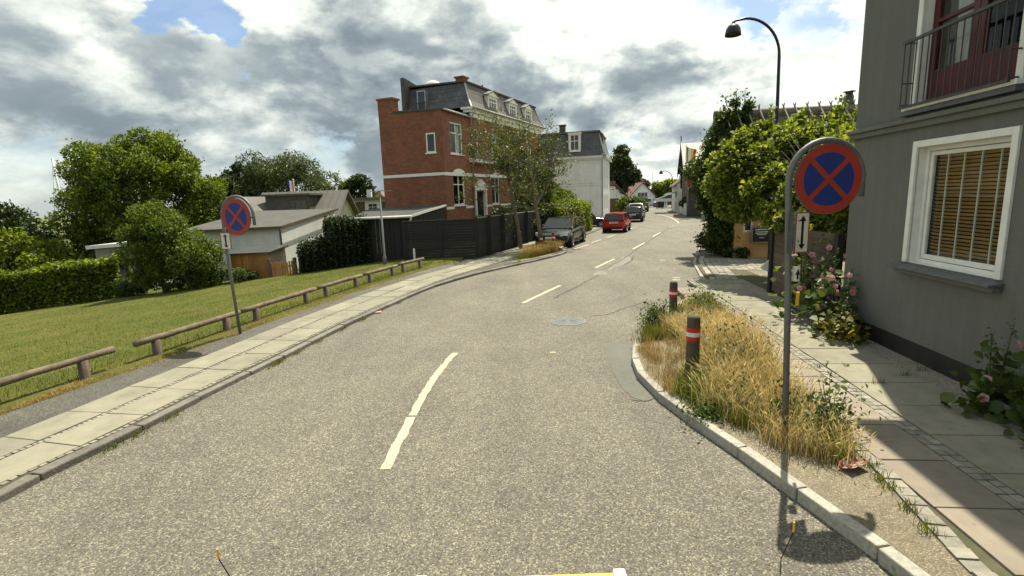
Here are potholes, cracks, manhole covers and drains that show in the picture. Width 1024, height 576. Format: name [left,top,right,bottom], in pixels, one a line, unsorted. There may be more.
manhole cover [550,317,586,326]
